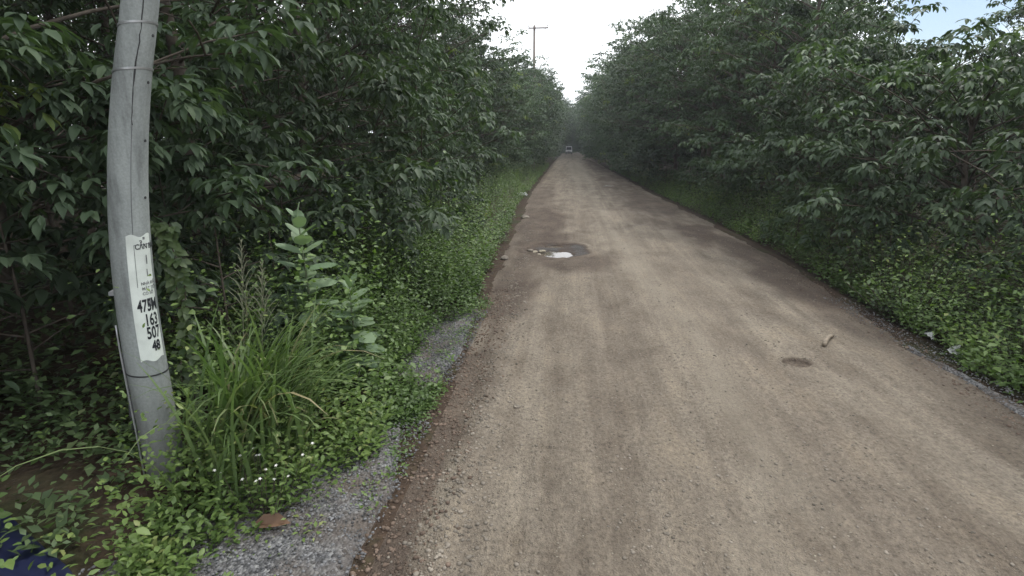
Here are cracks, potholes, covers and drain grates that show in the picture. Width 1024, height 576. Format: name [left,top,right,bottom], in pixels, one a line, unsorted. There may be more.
pothole [515,241,598,261]
pothole [777,357,818,369]
